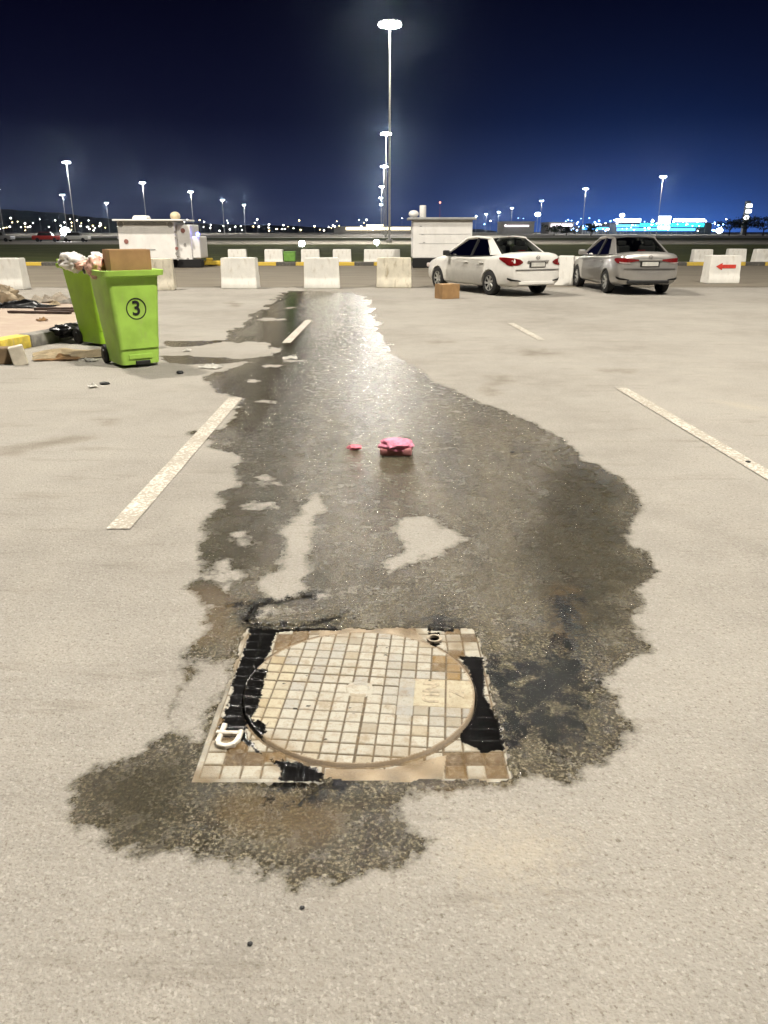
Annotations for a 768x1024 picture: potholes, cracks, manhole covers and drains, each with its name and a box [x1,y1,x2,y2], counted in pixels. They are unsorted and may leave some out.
crack [232,598,340,627]
manhole cover [192,627,513,786]
